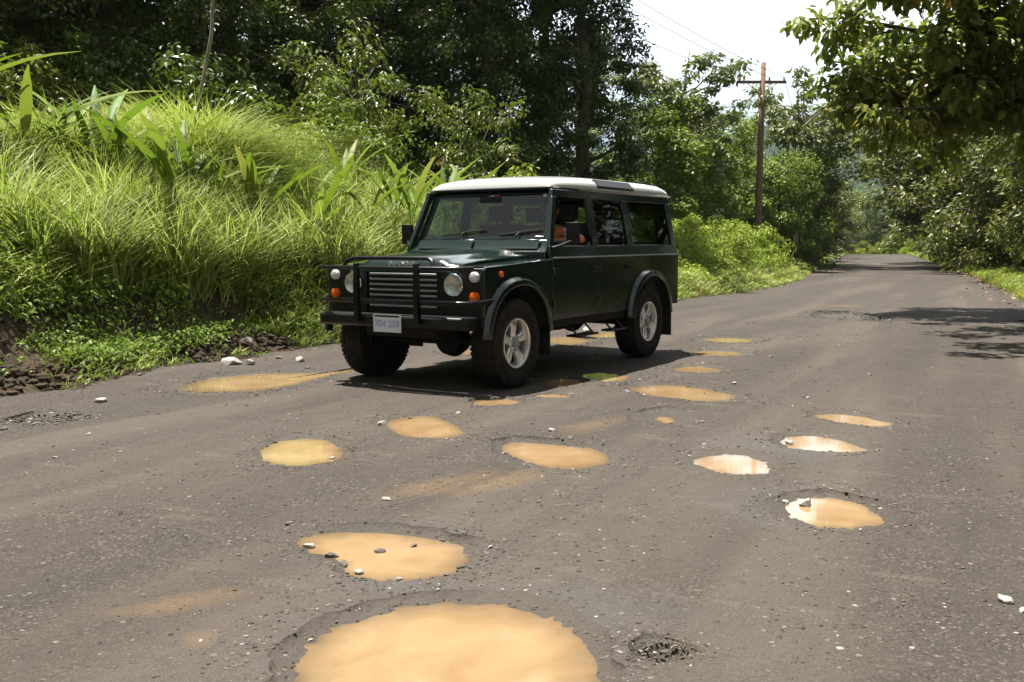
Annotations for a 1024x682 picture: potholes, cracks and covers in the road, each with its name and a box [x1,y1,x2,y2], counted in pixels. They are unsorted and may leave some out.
pothole [265,589,626,682]
pothole [0,411,101,426]
pothole [468,397,526,405]
pothole [757,488,906,530]
pothole [284,522,489,582]
pothole [661,364,733,373]
pothole [628,633,706,664]
pothole [490,435,623,470]
pothole [245,434,355,466]
pothole [165,368,354,393]
pothole [680,448,783,475]
